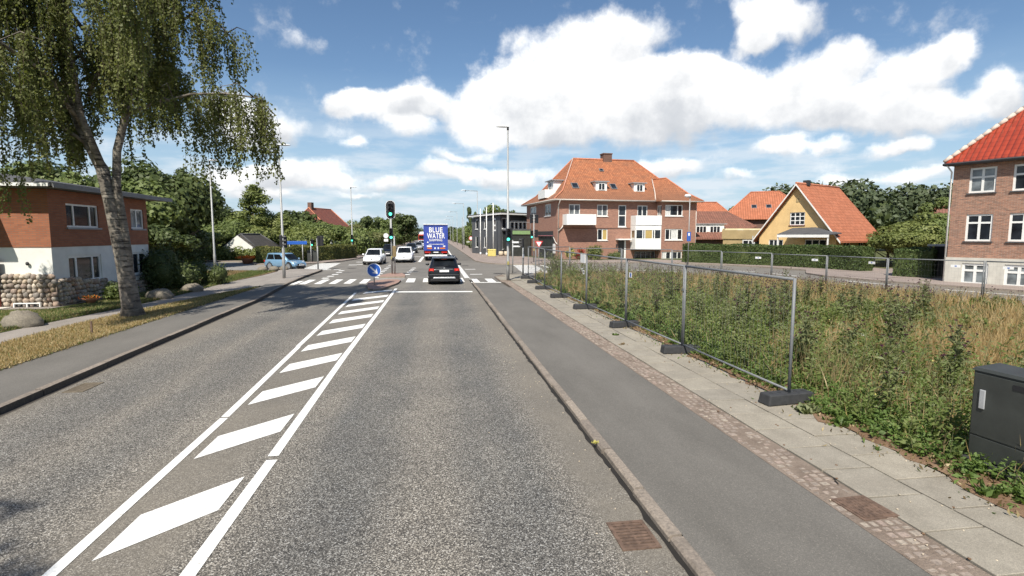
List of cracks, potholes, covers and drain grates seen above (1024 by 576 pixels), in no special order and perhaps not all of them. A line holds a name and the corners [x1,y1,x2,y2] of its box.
drain grate [606,520,662,551]
drain grate [61,382,104,393]
